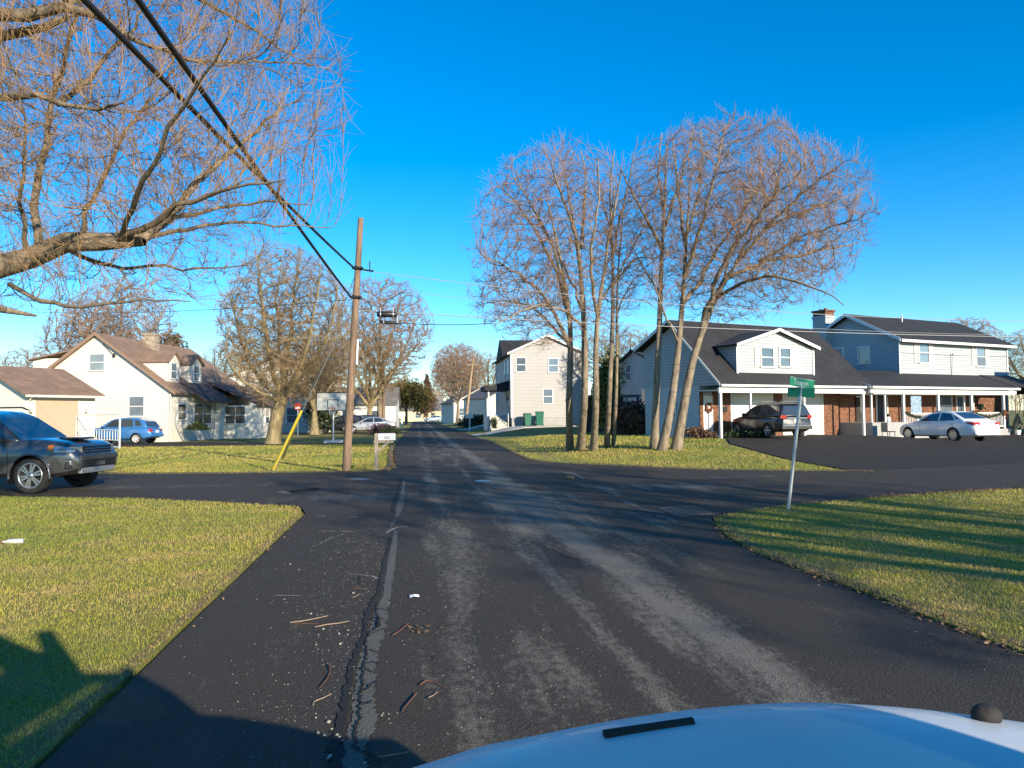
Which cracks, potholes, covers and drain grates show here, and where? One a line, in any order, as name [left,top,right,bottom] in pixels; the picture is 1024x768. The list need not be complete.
crack [279,478,407,768]
drain grate [658,505,715,517]
